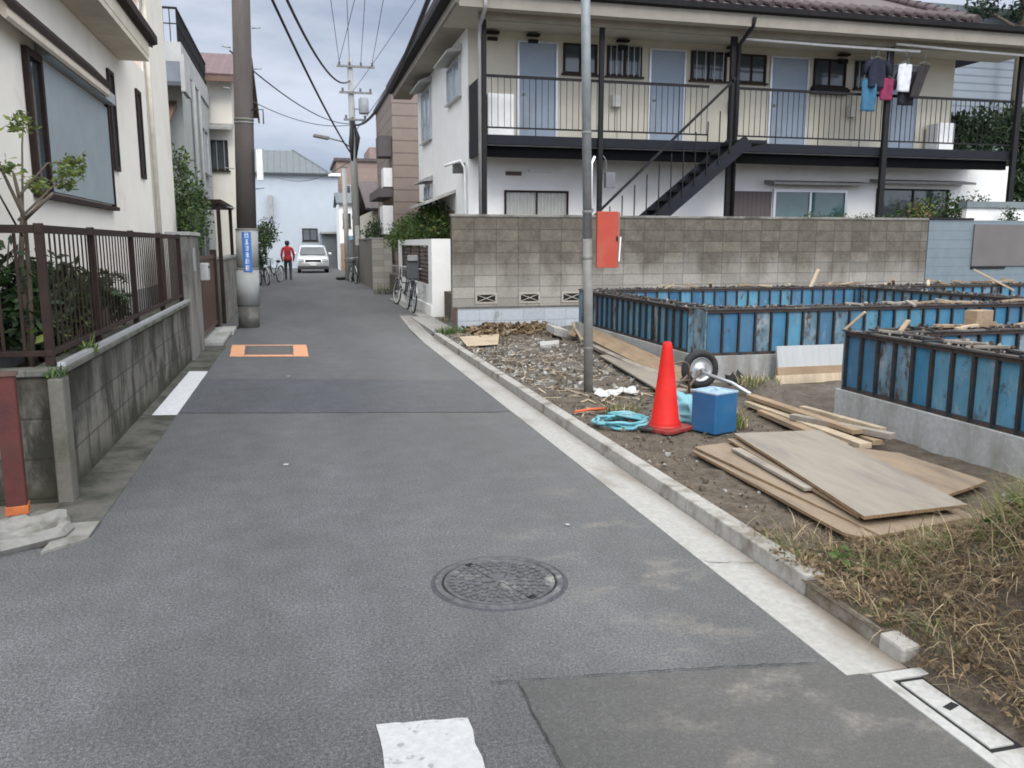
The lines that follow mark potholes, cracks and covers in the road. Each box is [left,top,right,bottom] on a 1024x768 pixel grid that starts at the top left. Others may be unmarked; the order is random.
manhole cover [431,556,568,612]
manhole cover [245,346,293,355]
